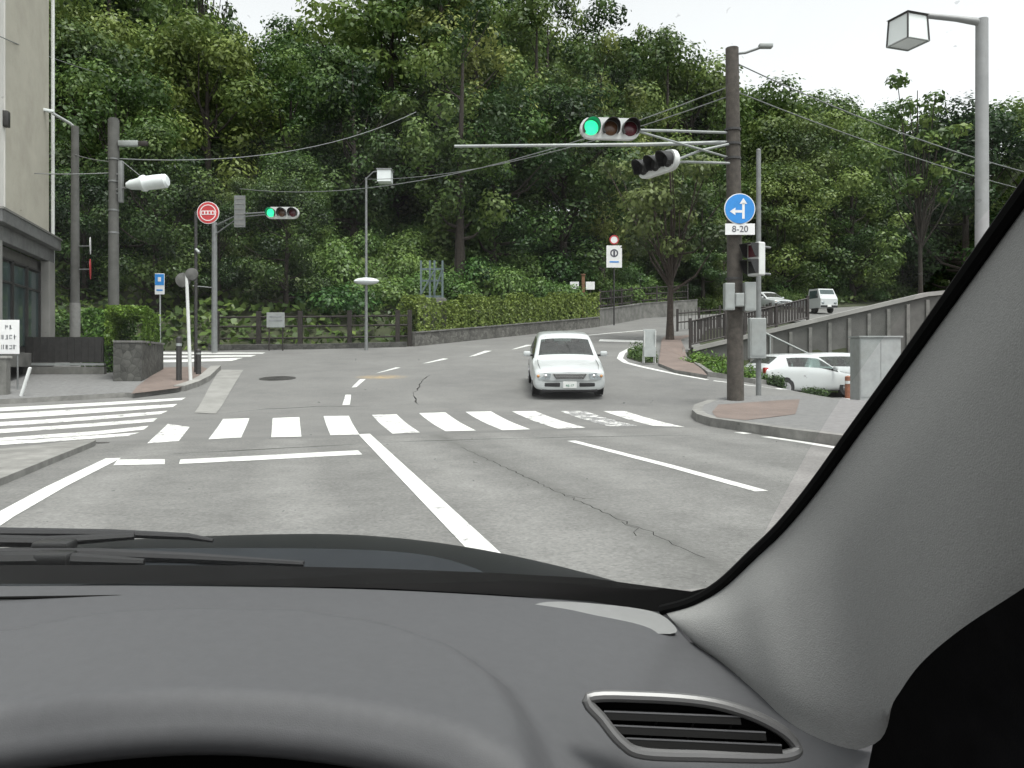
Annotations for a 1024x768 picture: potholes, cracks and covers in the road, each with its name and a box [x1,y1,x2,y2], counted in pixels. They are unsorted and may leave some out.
crack [179,435,702,557]
